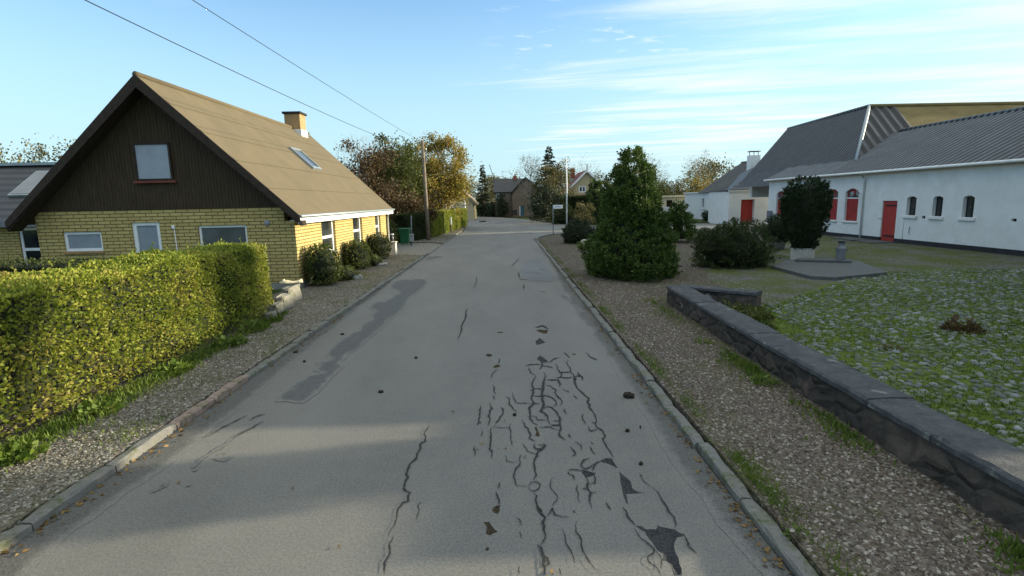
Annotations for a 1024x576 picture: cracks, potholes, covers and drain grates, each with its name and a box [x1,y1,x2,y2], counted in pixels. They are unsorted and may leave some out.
pothole [636,525,684,576]
pothole [619,472,643,504]
crack [383,425,430,574]
crack [205,414,263,439]
crack [473,353,696,574]
